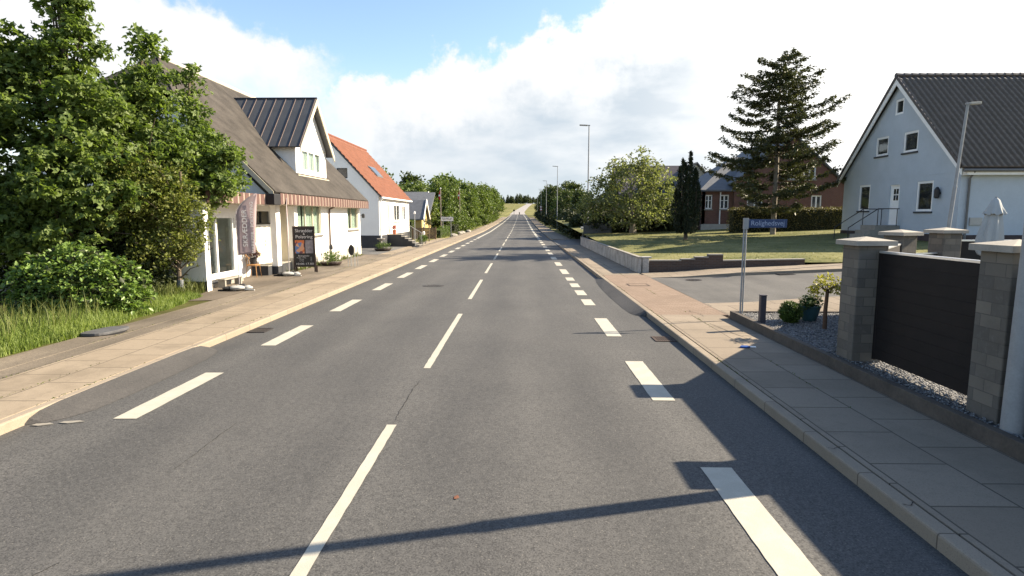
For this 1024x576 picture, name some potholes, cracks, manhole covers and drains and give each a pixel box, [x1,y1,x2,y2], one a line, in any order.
utility cover [80,326,129,336]
